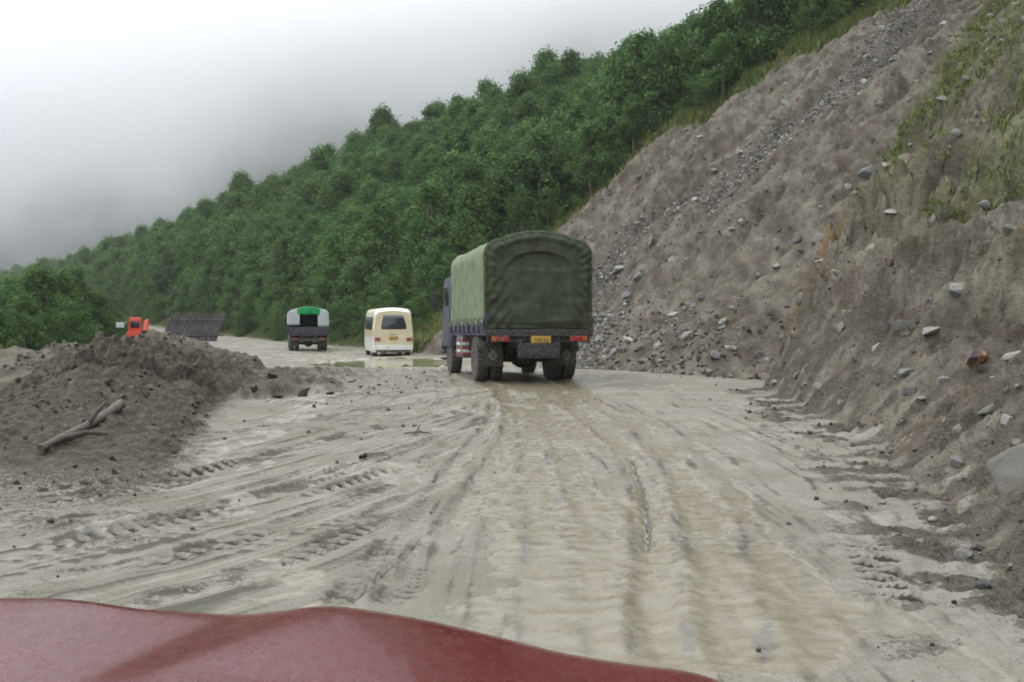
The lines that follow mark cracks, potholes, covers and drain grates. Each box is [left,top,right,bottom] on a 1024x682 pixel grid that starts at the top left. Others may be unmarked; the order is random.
pothole [309,357,447,369]
